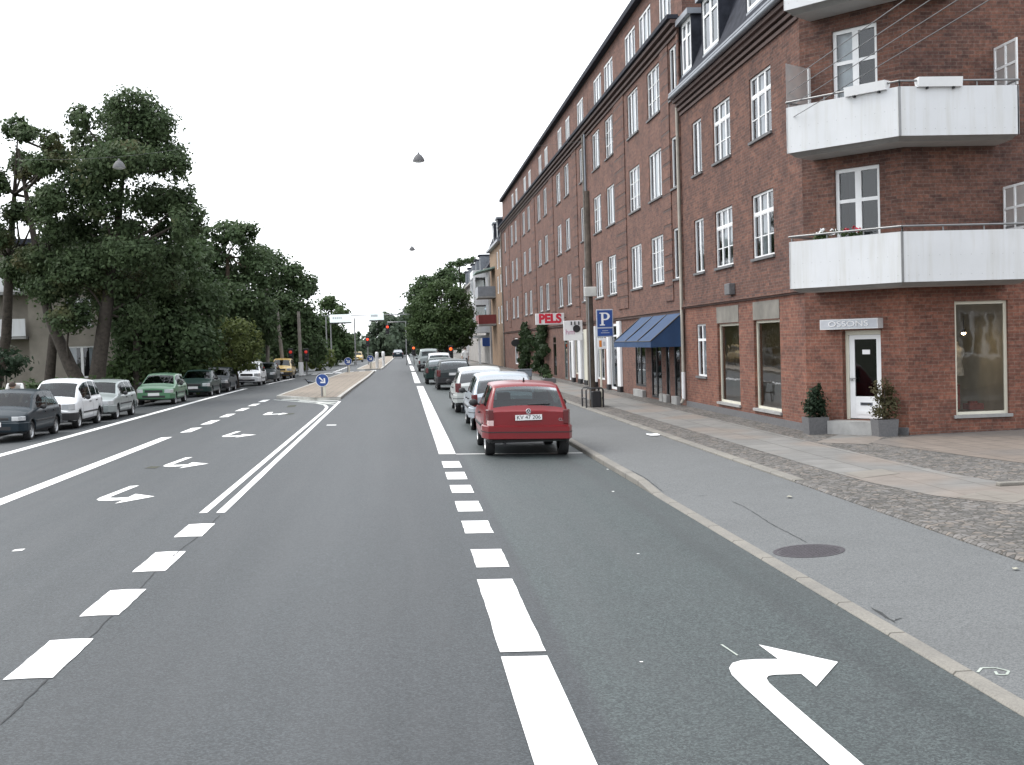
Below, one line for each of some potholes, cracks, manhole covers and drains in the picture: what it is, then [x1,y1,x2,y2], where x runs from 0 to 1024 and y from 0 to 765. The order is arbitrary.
crack [871,607,901,623]
manhole cover [773,544,845,558]
